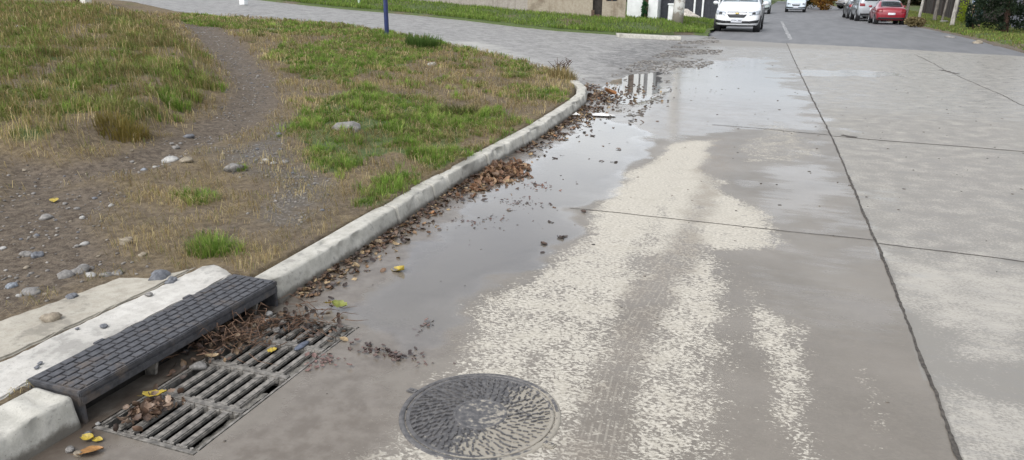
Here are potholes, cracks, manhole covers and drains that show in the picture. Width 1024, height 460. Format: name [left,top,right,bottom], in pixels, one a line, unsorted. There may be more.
drain grate [93,313,359,456]
manhole cover [399,373,561,460]
